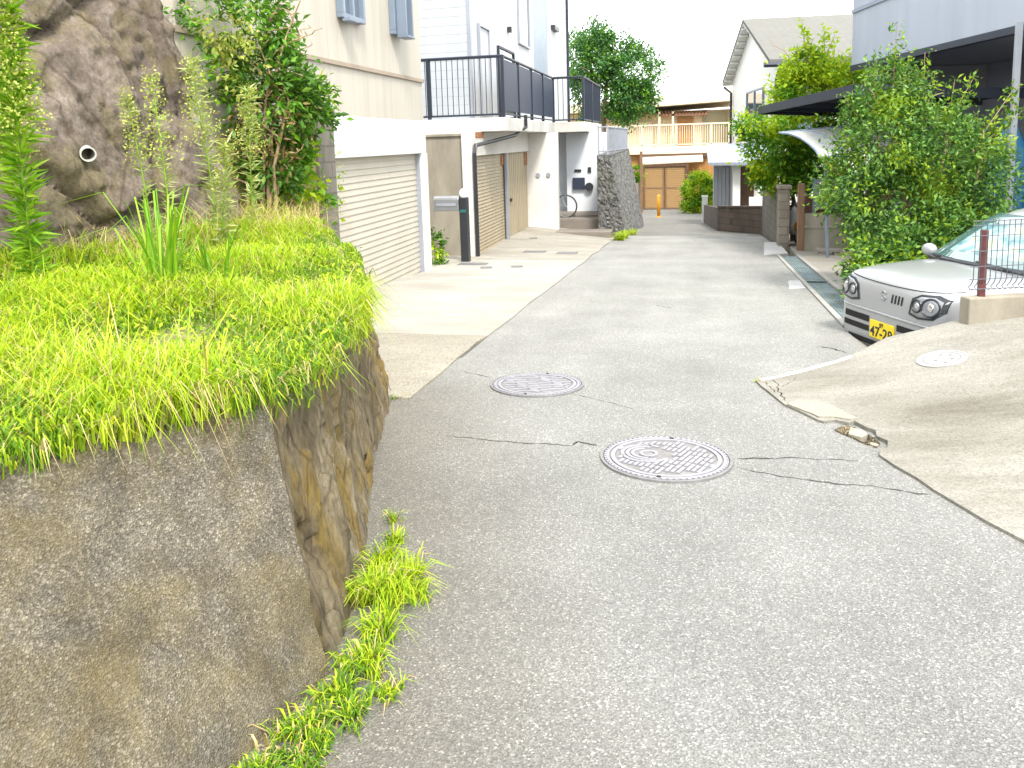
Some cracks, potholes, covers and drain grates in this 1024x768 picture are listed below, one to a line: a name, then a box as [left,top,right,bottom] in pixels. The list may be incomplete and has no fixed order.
manhole cover [600,435,733,484]
